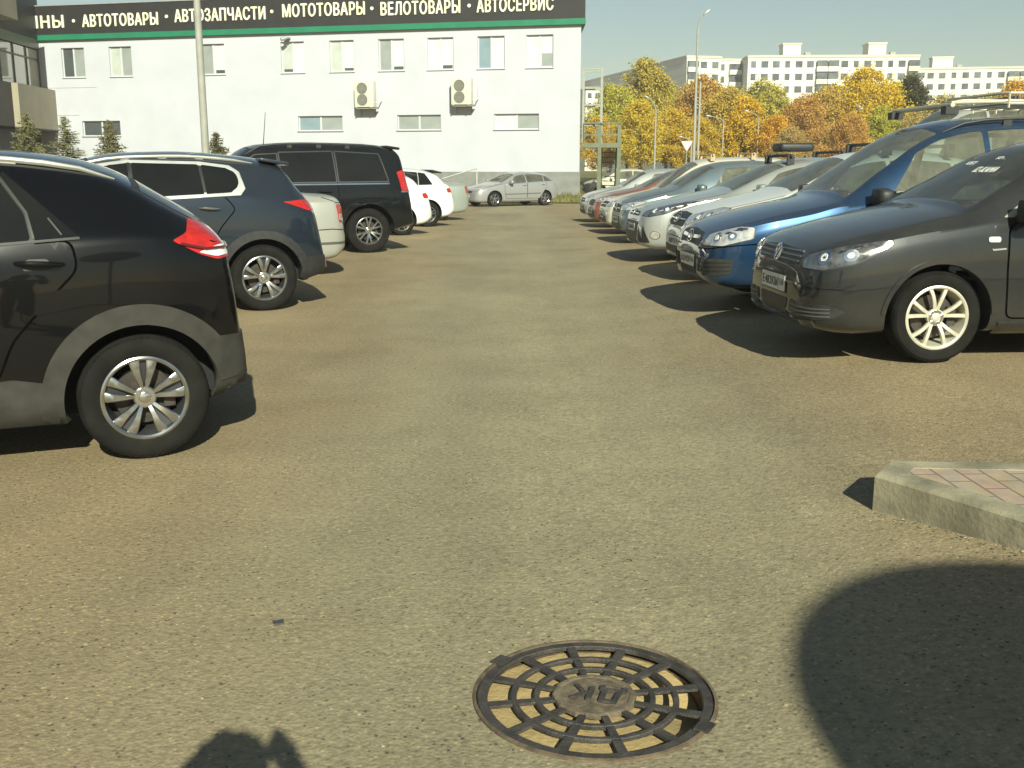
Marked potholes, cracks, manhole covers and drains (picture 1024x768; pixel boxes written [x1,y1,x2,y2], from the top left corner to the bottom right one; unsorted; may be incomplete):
manhole cover [473,640,718,763]
